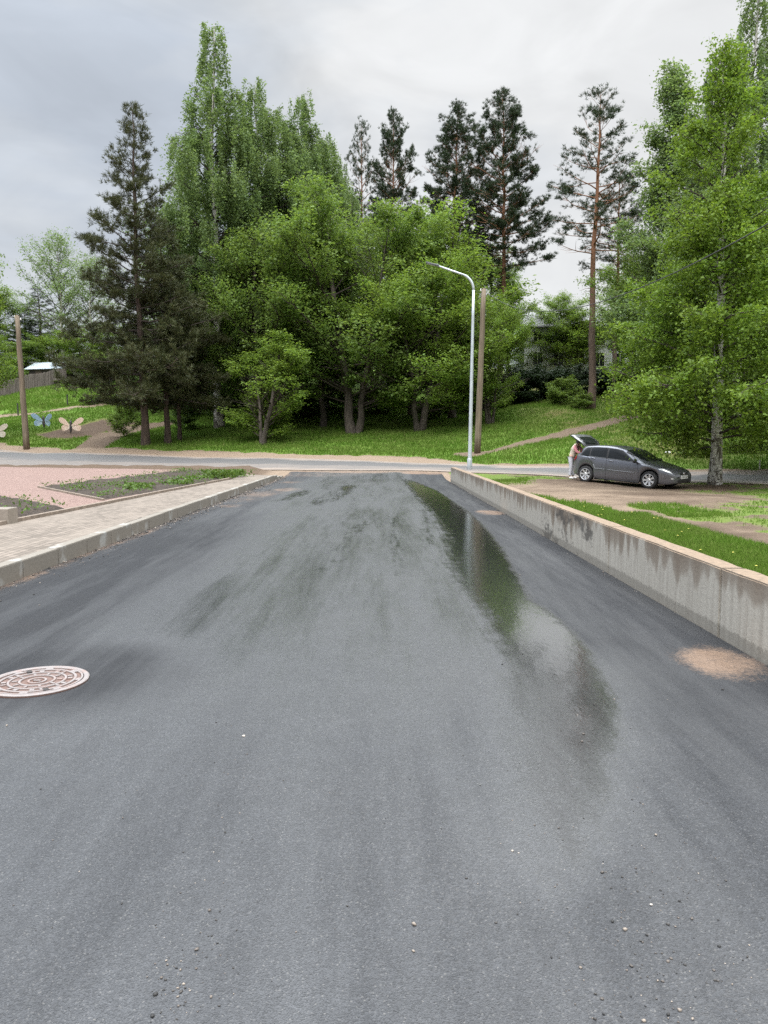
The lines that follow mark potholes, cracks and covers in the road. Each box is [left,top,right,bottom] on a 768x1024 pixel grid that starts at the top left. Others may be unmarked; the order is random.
manhole cover [0,666,90,698]
